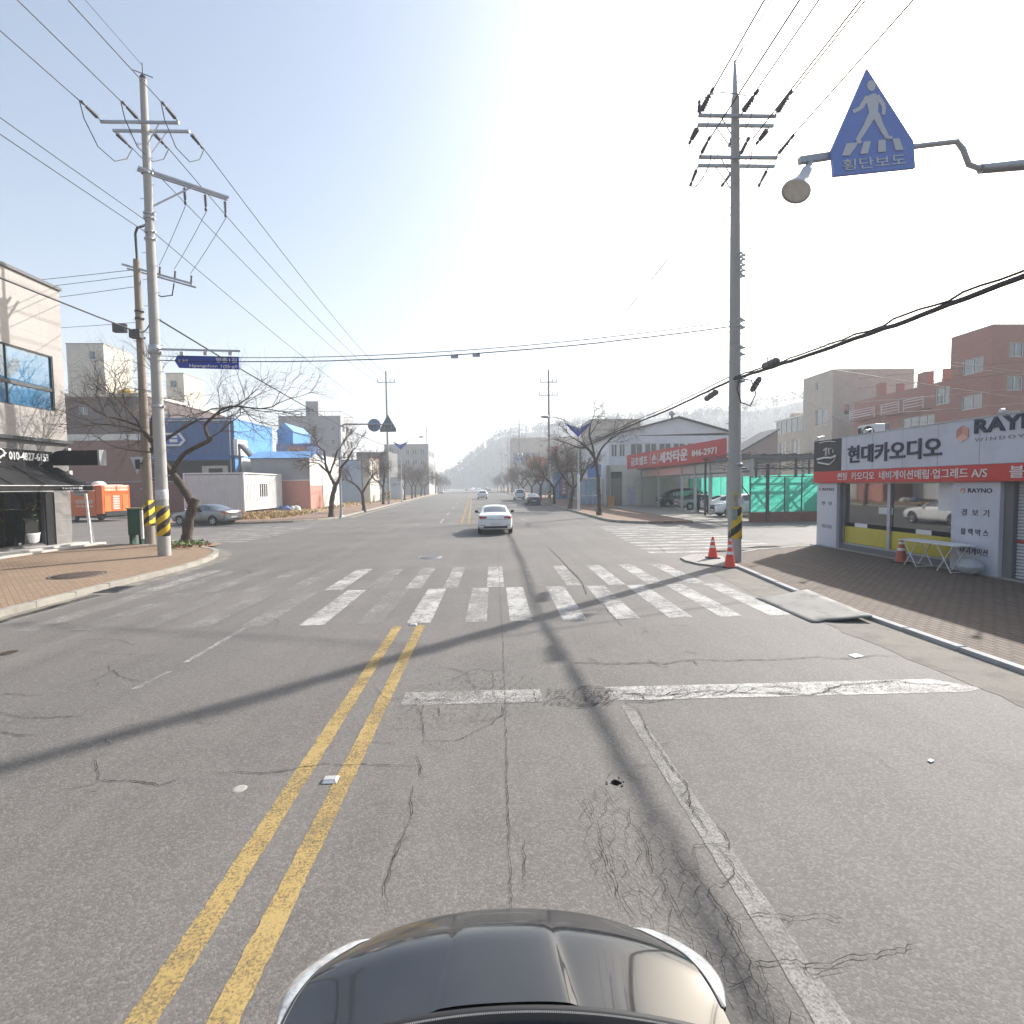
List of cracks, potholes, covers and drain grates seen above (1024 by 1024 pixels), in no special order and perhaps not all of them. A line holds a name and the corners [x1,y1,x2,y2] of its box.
crack [378,659,953,1024]
manhole cover [46,571,109,580]
crack [61,739,181,792]
